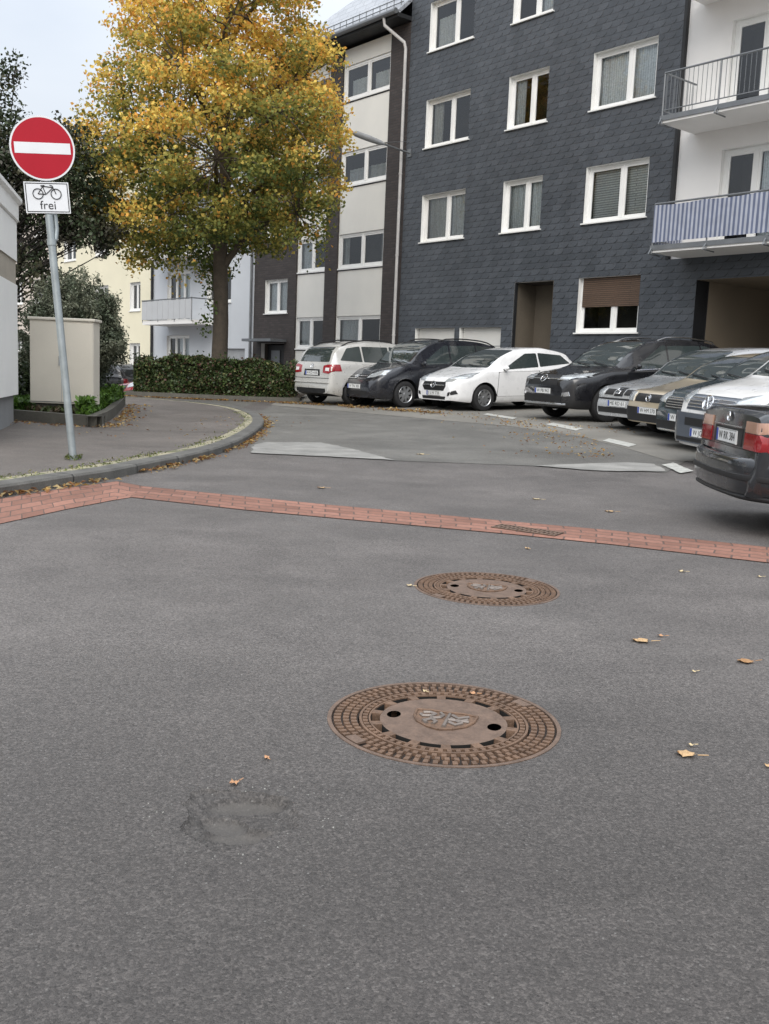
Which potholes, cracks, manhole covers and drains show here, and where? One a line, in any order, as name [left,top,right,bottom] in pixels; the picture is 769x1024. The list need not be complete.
drain grate [491,524,564,536]
pothole [179,788,303,853]
manhole cover [414,572,560,606]
manhole cover [327,682,561,768]
